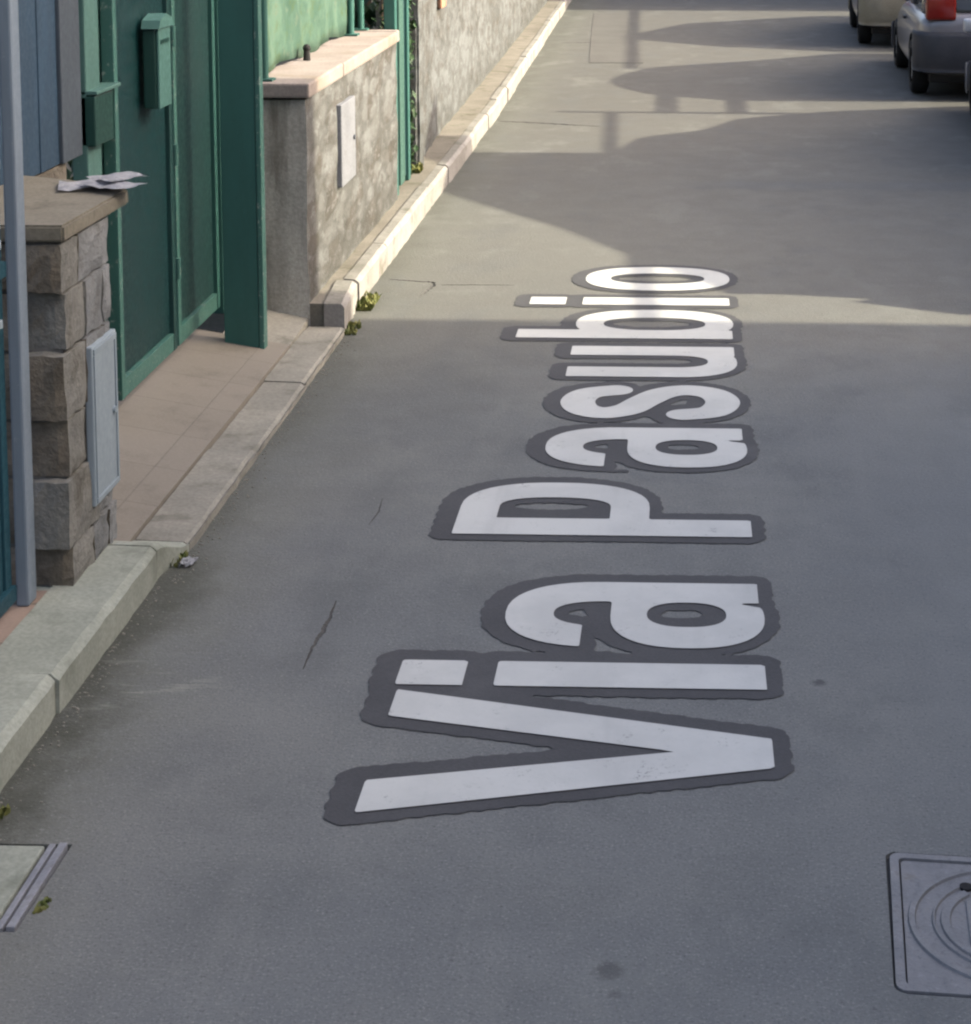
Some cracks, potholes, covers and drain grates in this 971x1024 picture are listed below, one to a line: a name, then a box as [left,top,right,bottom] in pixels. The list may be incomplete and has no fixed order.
crack [303,601,336,669]
manhole cover [886,853,971,998]
crack [391,279,436,298]
